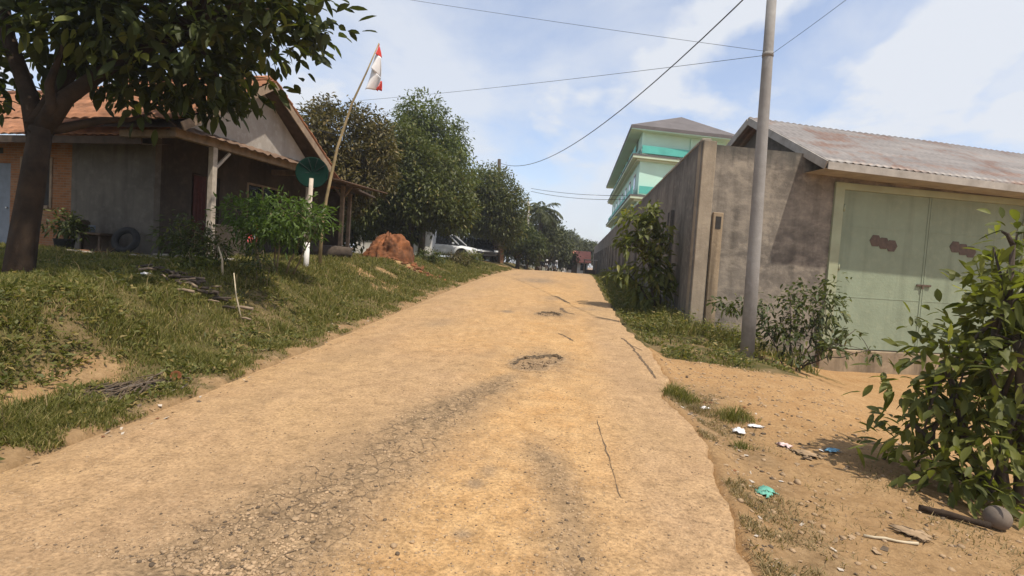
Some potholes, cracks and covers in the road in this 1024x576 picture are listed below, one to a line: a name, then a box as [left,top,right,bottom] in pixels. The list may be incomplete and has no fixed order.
crack [621,338,657,379]
crack [597,420,621,497]
pothole [504,354,567,372]
